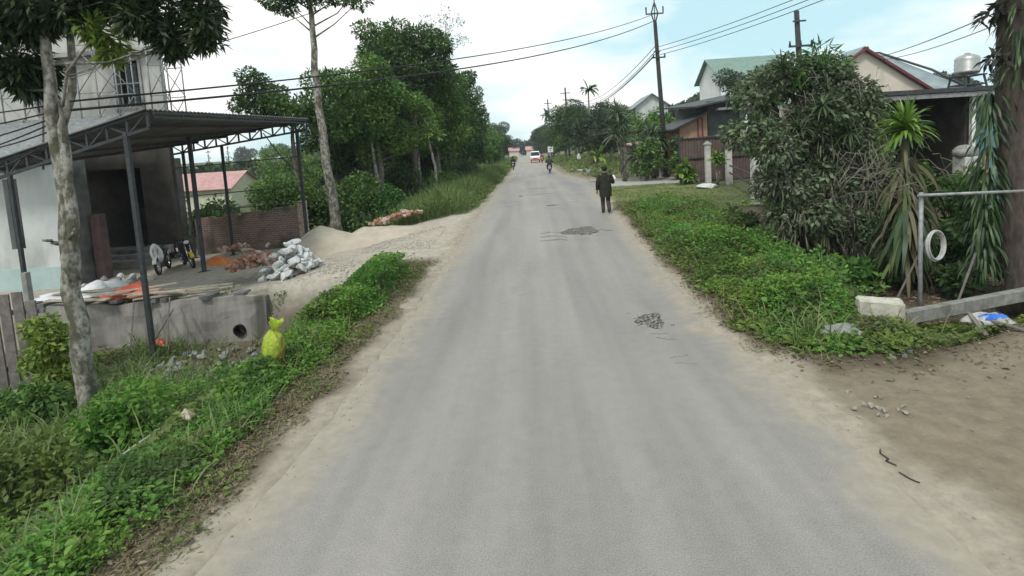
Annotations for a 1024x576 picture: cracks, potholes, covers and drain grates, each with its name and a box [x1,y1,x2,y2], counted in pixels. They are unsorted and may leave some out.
pothole [628,312,676,340]
pothole [541,226,611,241]
